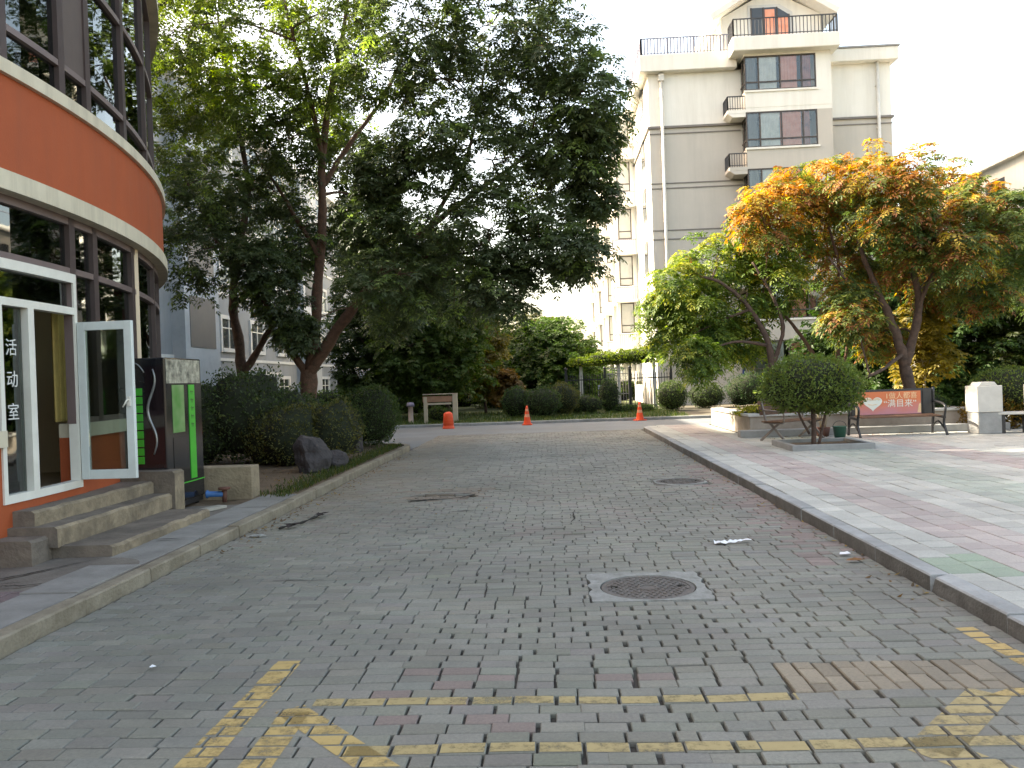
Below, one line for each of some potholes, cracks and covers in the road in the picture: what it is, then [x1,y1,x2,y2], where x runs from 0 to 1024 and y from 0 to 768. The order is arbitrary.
manhole cover [586,571,715,605]
manhole cover [651,478,710,486]
